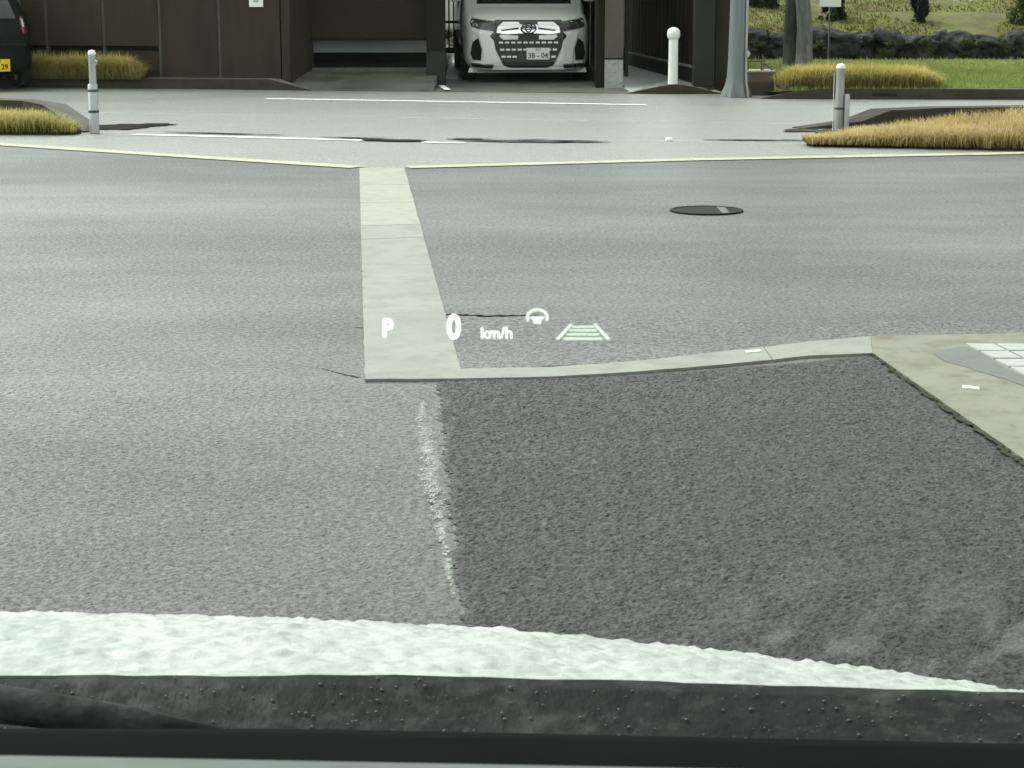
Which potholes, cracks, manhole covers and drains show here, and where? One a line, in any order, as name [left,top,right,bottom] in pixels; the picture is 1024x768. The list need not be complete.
manhole cover [670,205,744,215]
